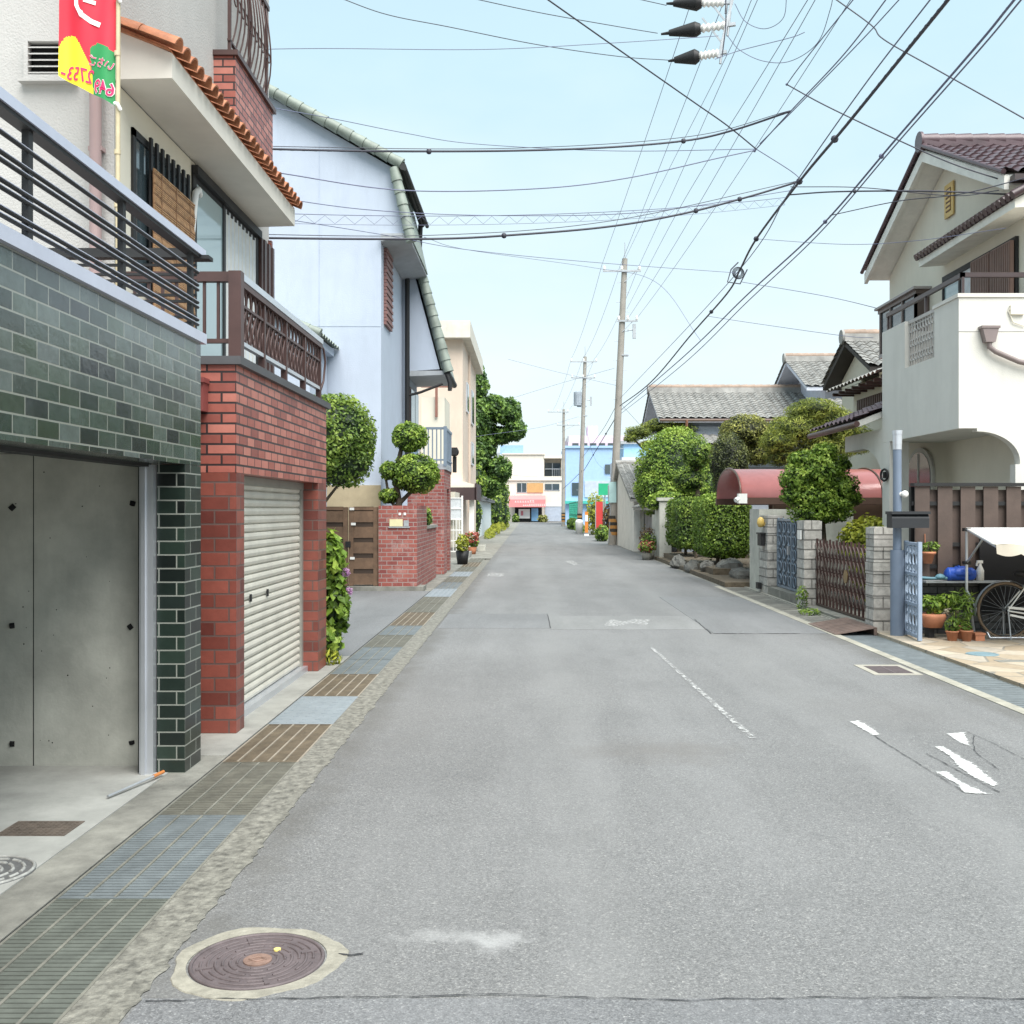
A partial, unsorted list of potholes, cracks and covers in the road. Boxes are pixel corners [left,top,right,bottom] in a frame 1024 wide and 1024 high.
manhole cover [854,665,923,675]
manhole cover [0,855,37,884]
crack [874,731,1024,792]
manhole cover [170,927,349,1001]
manhole cover [0,821,85,836]
